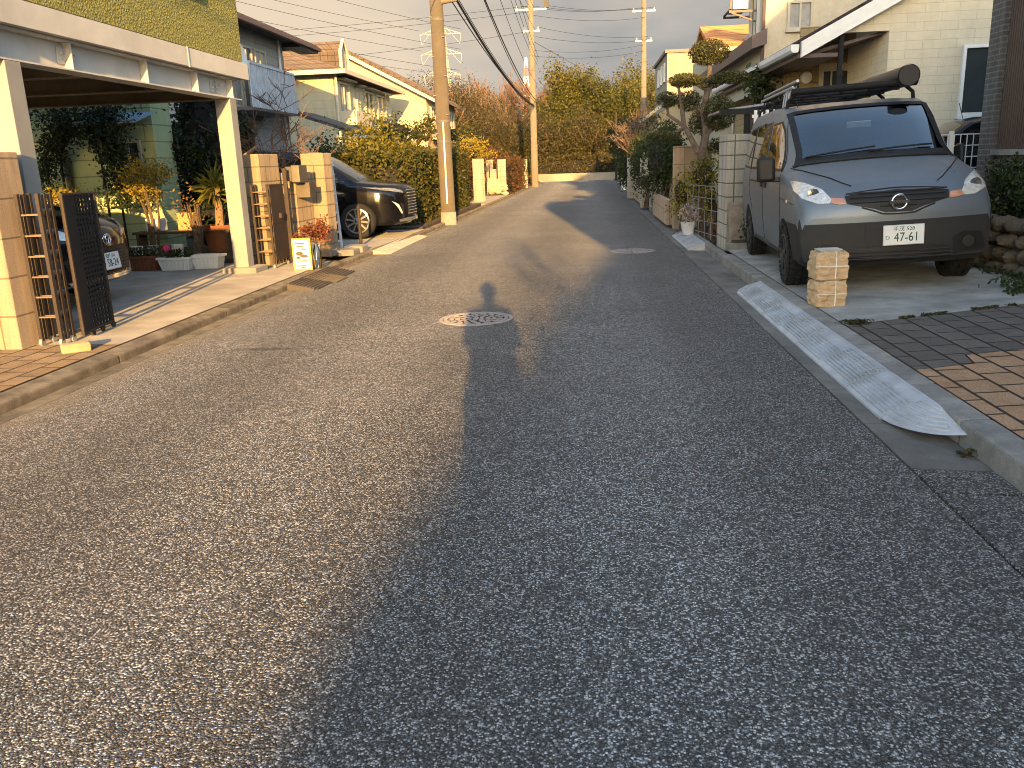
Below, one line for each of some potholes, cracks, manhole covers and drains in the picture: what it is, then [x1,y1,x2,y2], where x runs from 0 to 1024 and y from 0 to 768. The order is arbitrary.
manhole cover [439,312,513,326]
